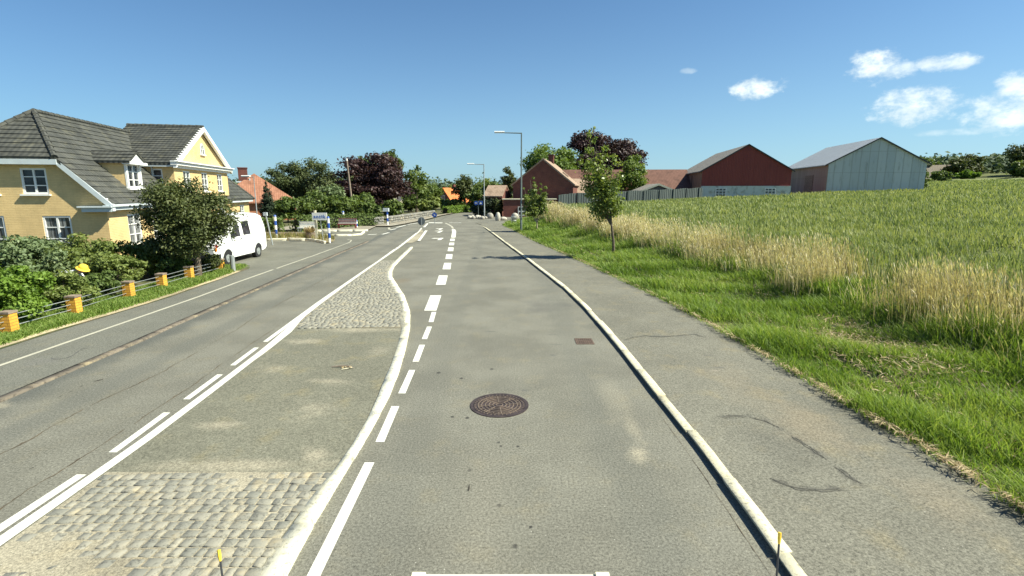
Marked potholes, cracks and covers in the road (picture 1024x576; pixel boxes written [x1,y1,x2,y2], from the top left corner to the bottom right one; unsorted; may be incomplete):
manhole cover [470,393,529,418]
crack [723,415,862,492]
